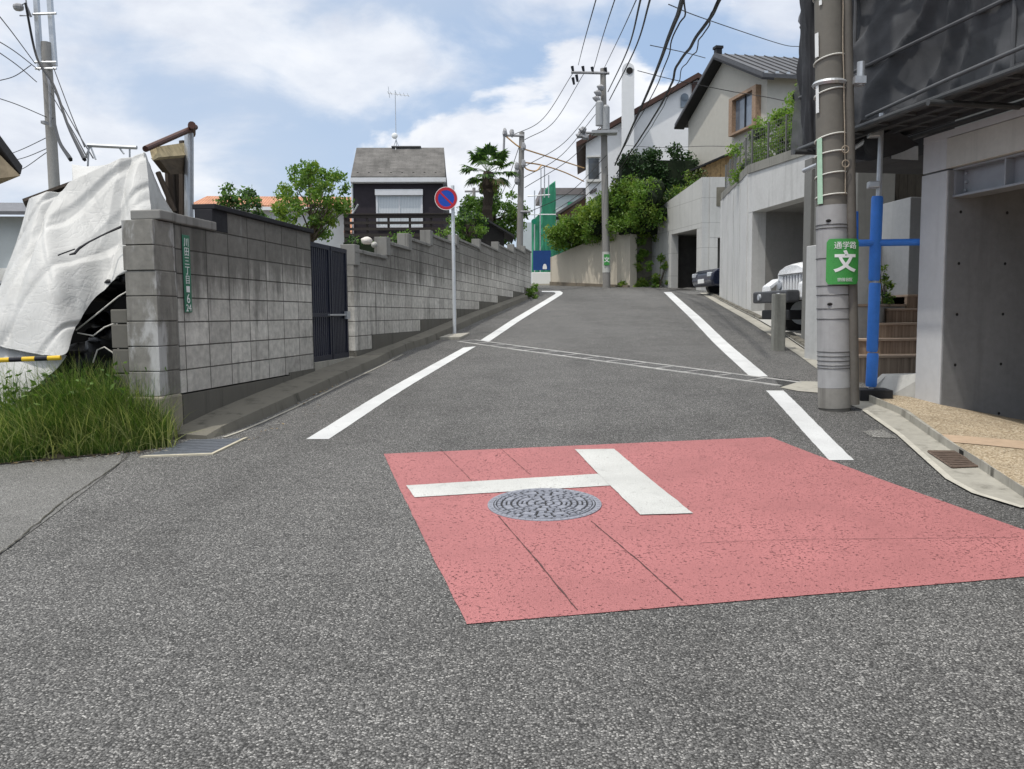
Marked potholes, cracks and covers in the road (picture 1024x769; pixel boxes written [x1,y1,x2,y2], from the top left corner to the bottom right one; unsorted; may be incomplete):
manhole cover [488,488,602,521]
drain grate [927,445,994,477]
